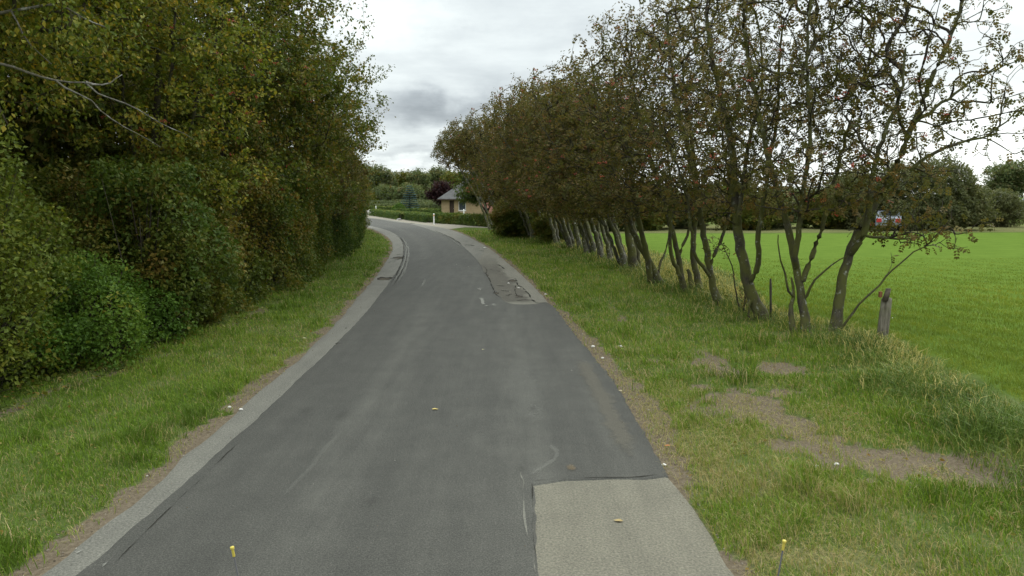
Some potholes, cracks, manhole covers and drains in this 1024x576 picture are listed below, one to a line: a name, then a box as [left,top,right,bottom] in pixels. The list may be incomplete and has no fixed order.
crack [461,244,548,303]
